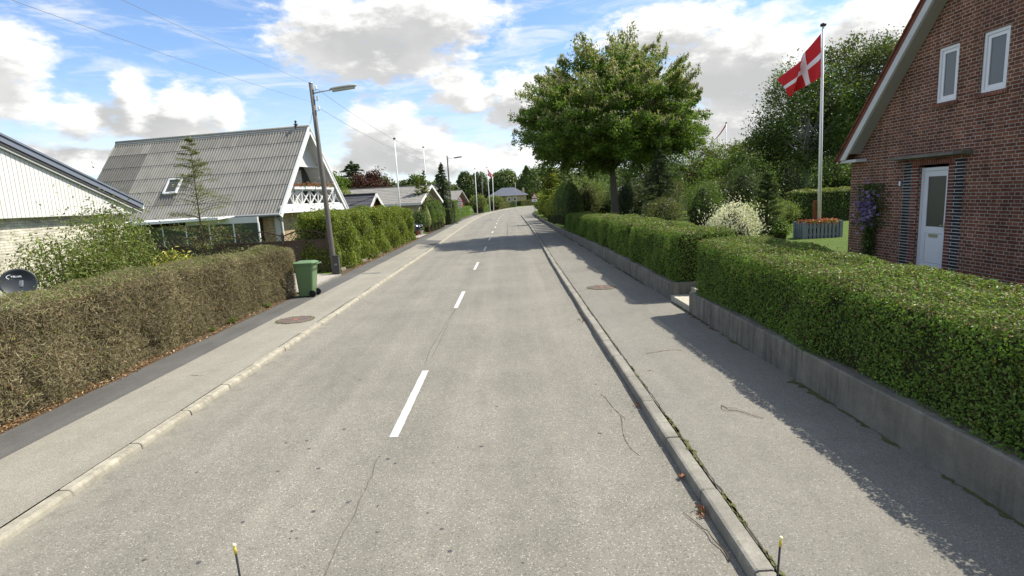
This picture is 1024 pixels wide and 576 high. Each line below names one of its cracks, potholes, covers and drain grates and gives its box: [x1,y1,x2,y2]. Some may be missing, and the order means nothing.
manhole cover [275,316,314,324]
